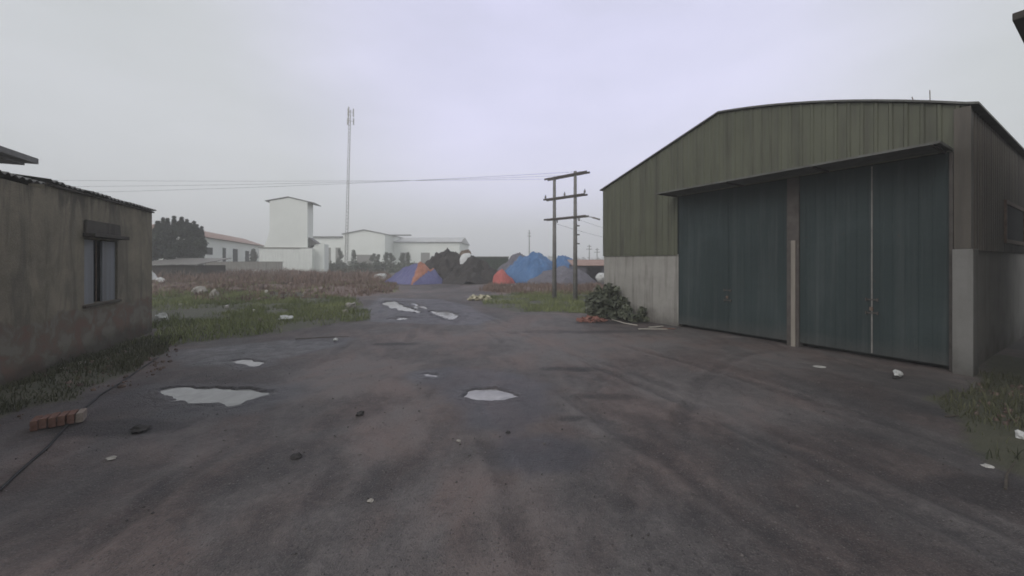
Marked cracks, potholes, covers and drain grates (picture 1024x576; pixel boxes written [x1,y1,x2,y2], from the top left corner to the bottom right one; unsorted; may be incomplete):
pothole [453,383,531,406]
pothole [143,383,290,411]
pothole [420,309,468,321]
pothole [375,300,431,313]
pothole [221,357,275,369]
